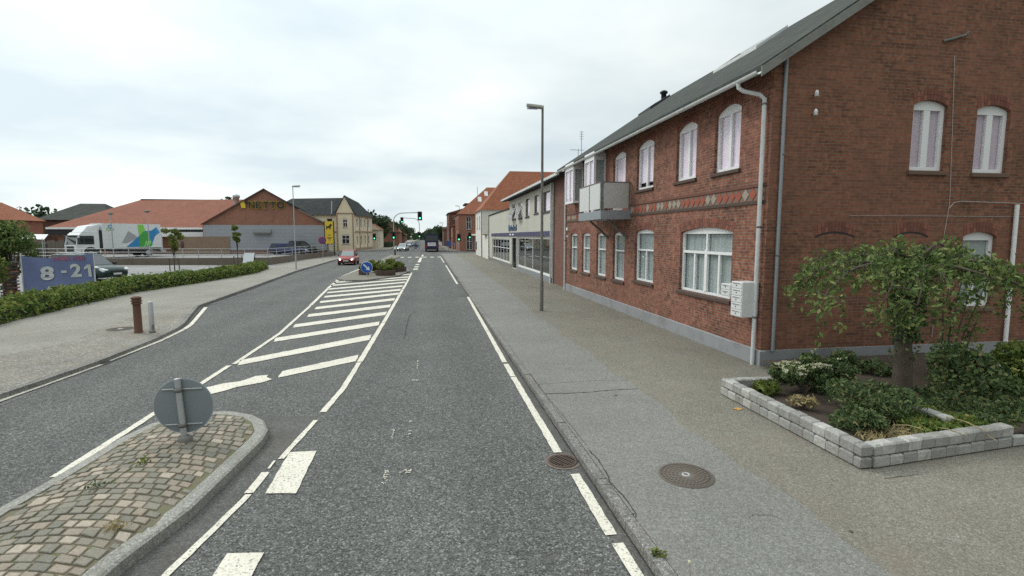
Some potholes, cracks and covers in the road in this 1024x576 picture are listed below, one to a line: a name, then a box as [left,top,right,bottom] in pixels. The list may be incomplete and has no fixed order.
manhole cover [658,463,715,489]
crack [589,450,637,517]
drain grate [548,454,577,468]
